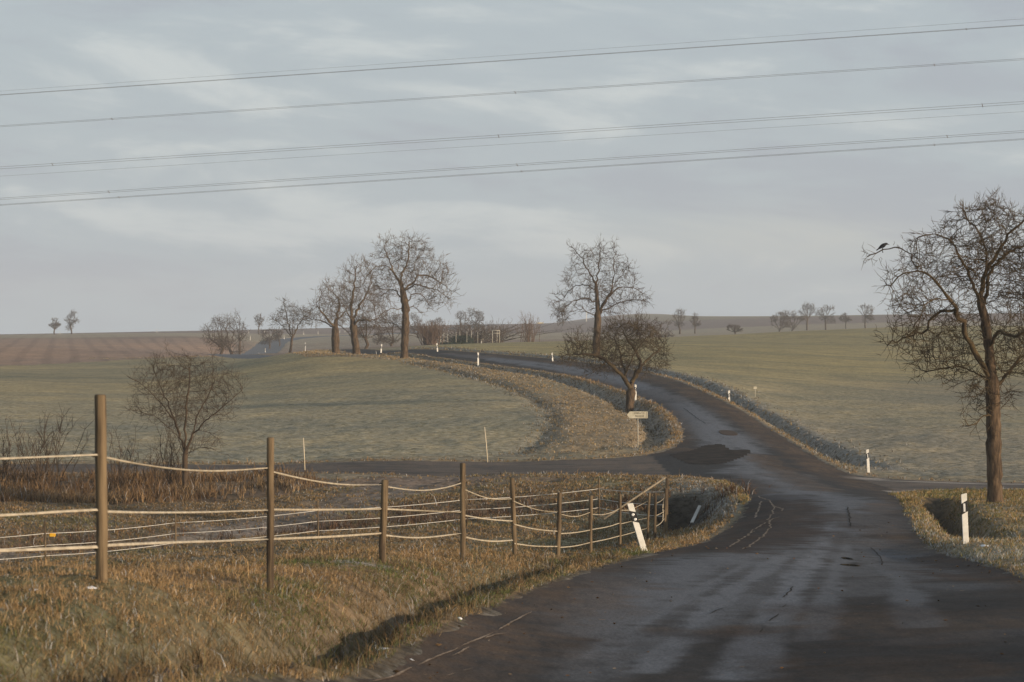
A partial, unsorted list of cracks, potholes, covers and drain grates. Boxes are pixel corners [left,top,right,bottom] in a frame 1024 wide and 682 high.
crack [729,496,784,549]
